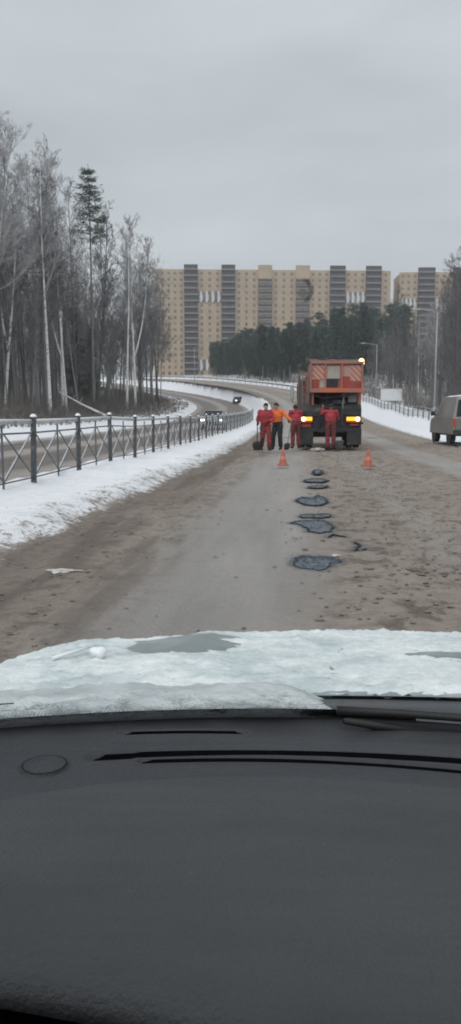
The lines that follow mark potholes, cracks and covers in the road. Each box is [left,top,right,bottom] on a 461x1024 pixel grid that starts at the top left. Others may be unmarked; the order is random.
crack [328,534,367,551]
